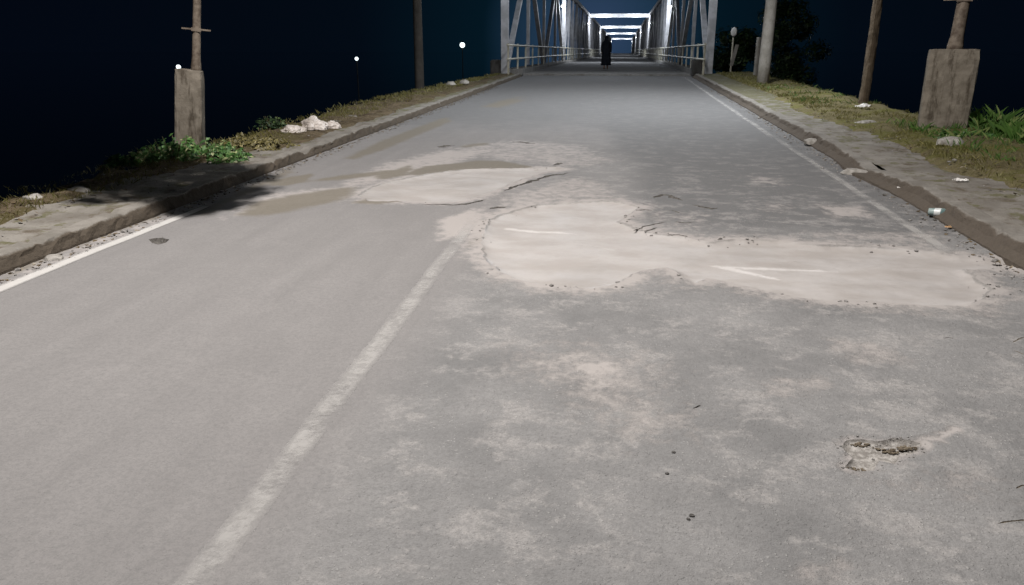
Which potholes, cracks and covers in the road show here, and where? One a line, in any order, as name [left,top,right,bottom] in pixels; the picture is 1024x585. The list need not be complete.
pothole [835,435,925,473]
crack [425,163,574,209]
crack [634,194,717,237]
